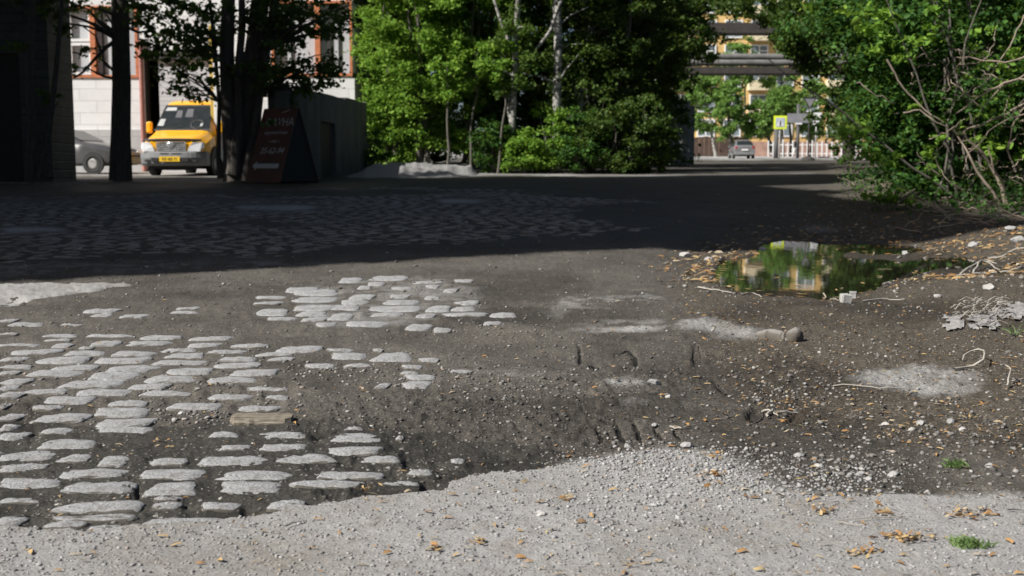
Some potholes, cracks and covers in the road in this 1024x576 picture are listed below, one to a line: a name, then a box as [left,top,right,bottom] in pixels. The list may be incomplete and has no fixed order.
pothole [0,418,565,531]
pothole [787,413,807,425]
pothole [745,407,764,423]
